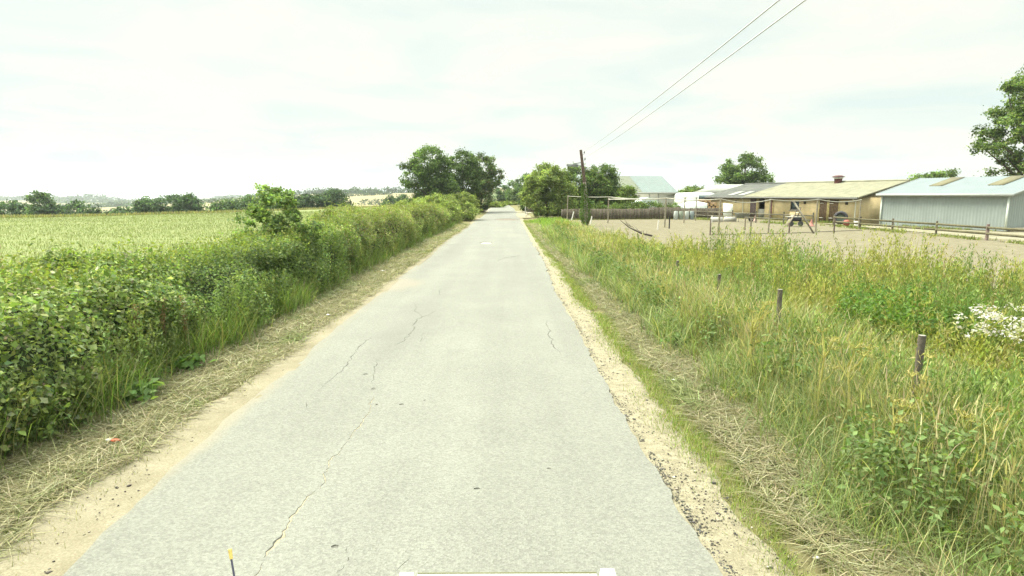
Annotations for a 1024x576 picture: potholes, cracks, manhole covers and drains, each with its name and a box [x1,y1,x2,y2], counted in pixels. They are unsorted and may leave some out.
crack [255,338,378,576]
